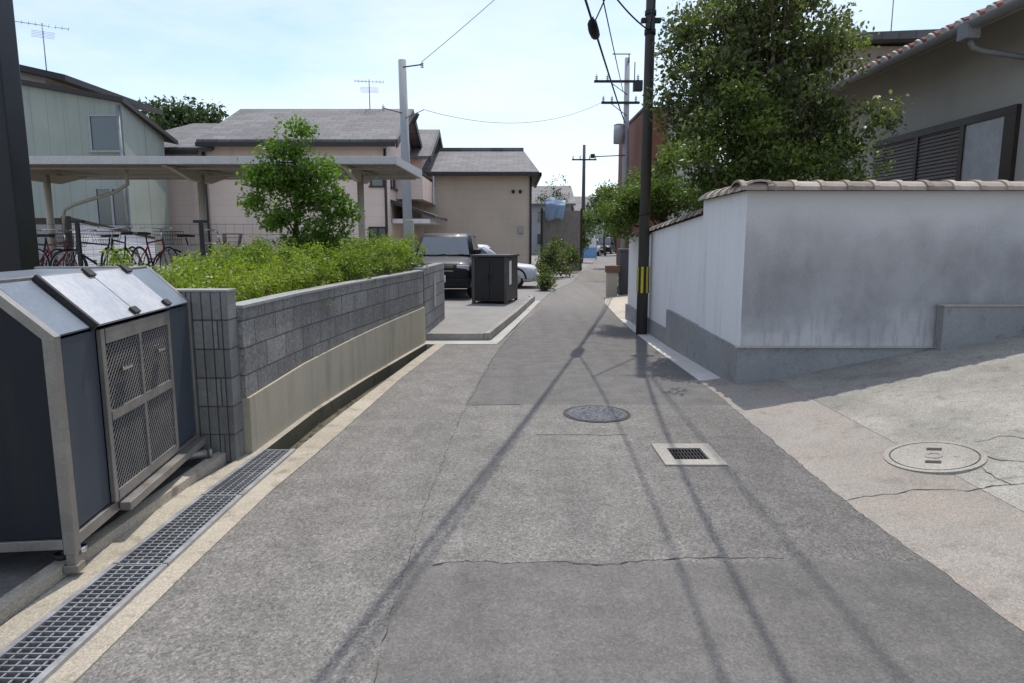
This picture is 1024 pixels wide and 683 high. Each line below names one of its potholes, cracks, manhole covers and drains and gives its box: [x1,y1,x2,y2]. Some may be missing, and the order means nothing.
drain grate [113,495,242,566]
crack [845,436,1024,501]
crack [434,556,784,565]
drain grate [0,564,167,683]
drain grate [201,449,296,497]
manhole cover [563,405,631,423]
manhole cover [883,441,988,474]
